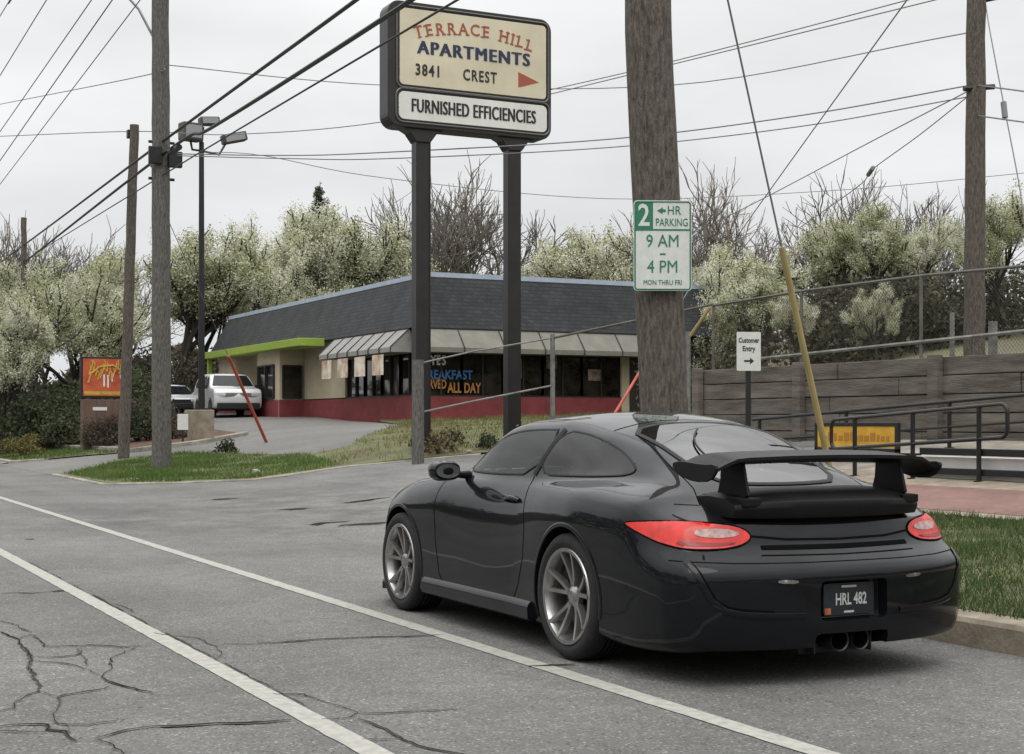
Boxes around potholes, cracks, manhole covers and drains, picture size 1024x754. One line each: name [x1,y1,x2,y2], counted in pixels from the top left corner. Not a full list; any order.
crack [1,562,464,754]
